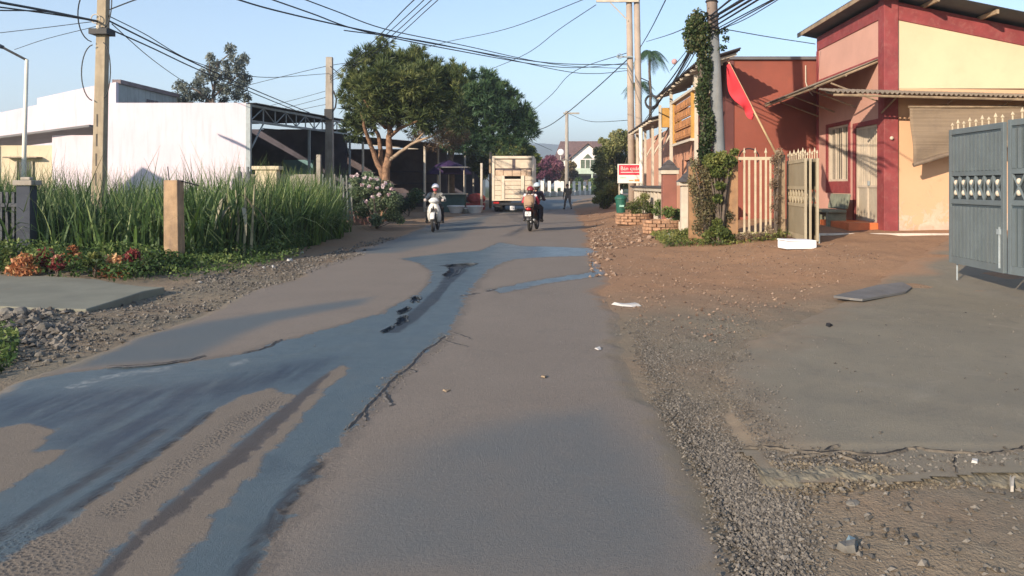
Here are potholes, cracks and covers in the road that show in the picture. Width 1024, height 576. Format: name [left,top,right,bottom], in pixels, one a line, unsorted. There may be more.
crack [348,331,472,428]
pothole [440,263,478,278]
